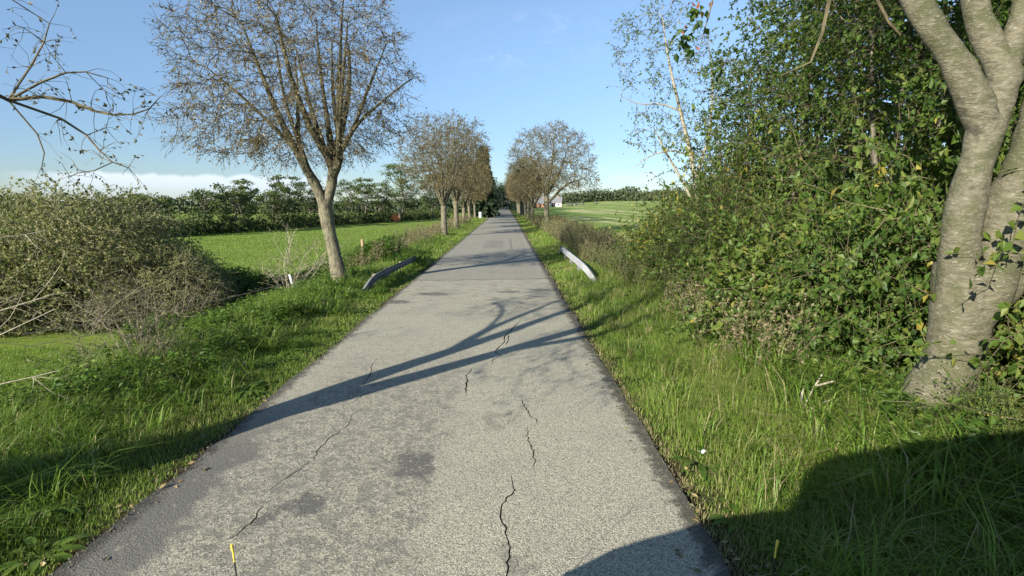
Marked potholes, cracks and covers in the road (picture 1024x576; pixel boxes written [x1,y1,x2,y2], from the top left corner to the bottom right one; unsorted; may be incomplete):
crack [522,399,538,466]
crack [490,319,521,368]
crack [229,360,377,539]
crack [500,473,515,576]
